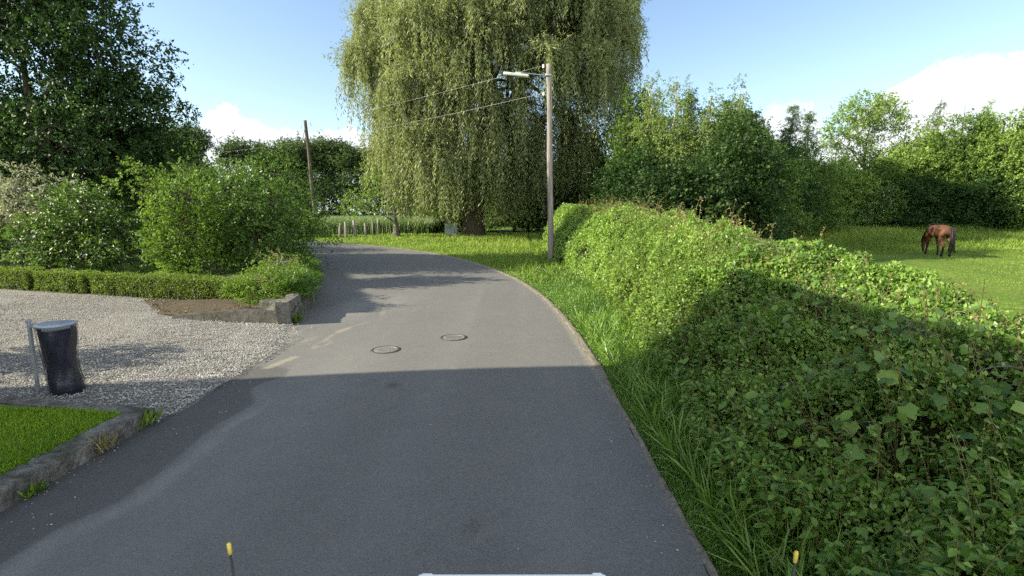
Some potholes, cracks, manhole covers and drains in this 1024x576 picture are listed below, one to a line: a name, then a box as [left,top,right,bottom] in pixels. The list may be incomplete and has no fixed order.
manhole cover [370,346,401,354]
